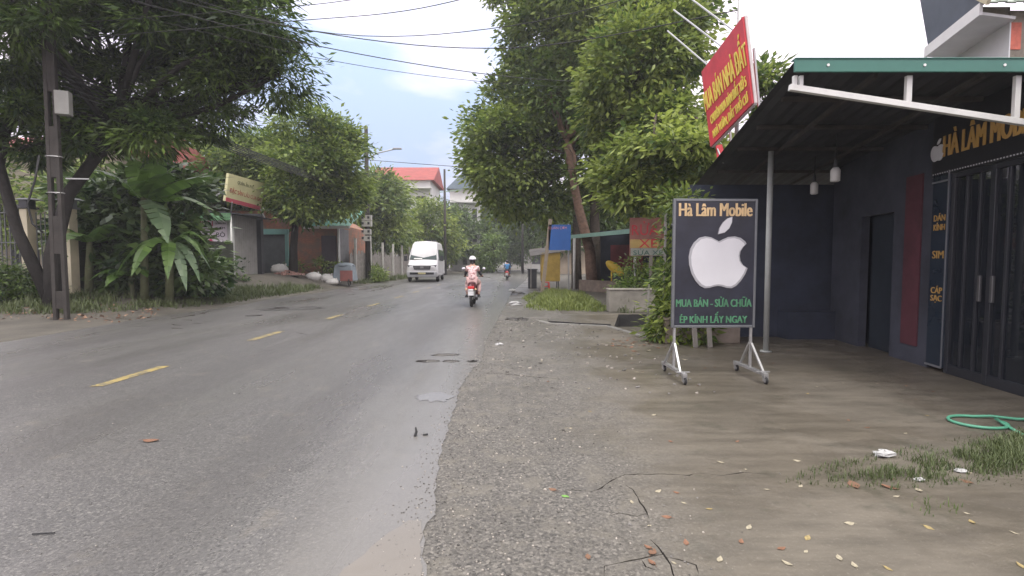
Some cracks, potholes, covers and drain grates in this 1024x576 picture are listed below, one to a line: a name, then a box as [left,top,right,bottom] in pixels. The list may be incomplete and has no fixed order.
crack [577,472,757,576]
